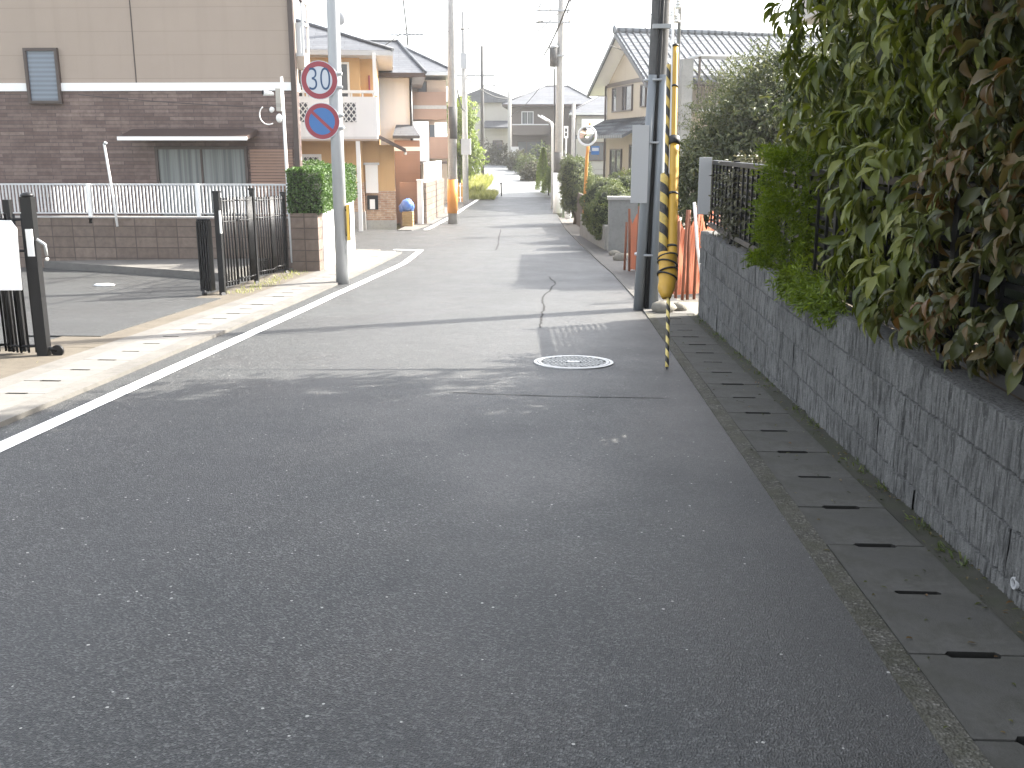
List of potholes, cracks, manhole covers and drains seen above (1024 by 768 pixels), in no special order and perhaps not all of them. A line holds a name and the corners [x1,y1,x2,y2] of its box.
crack [539,277,556,328]
manhole cover [534,355,613,370]
